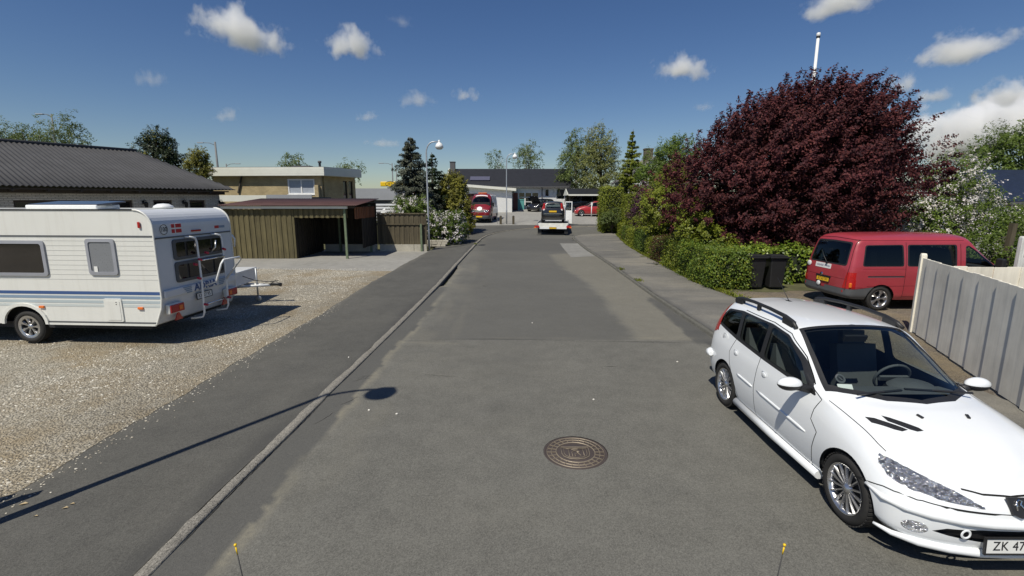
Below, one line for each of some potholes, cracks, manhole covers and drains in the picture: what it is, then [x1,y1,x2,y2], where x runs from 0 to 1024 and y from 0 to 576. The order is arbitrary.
manhole cover [544,437,608,470]
